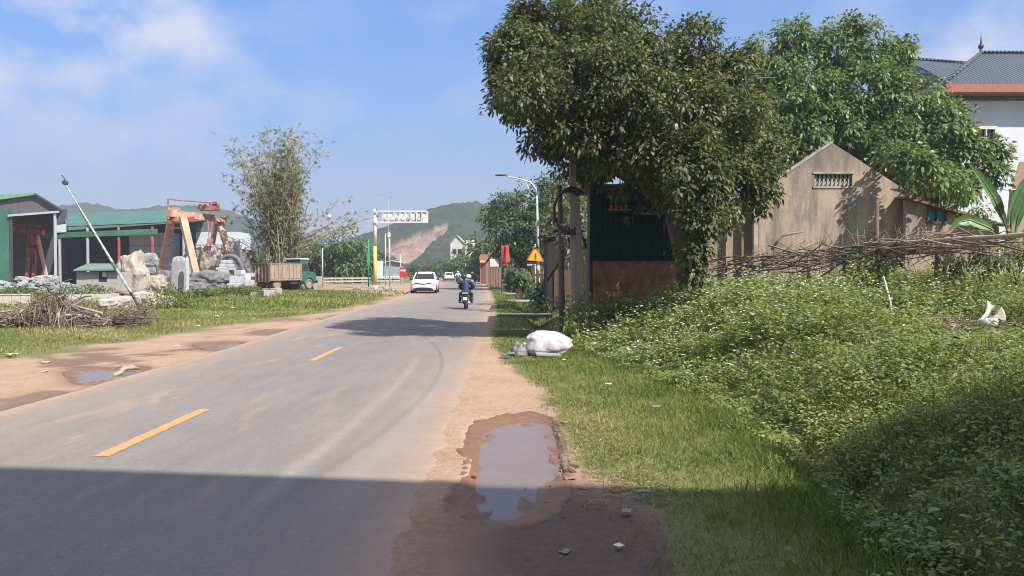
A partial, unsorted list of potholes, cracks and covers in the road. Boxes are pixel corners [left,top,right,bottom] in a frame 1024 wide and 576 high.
pothole [443,411,573,528]
